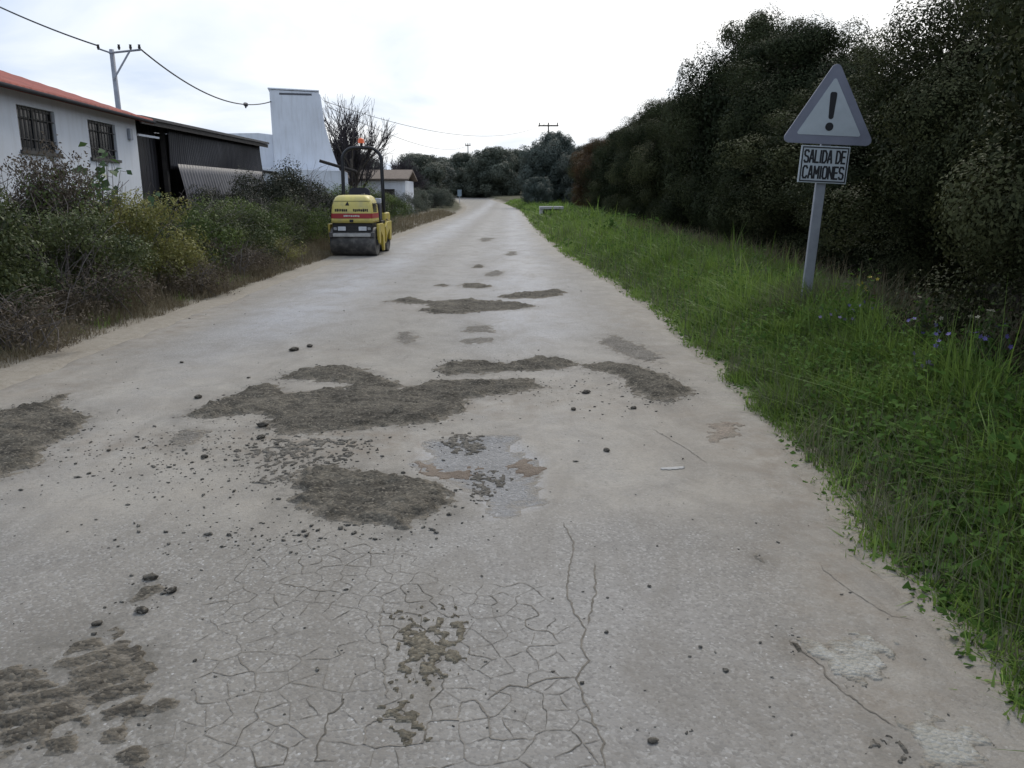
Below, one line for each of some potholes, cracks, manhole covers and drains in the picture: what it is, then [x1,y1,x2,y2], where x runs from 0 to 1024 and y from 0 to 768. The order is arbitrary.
pothole [407,434,551,519]
crack [143,522,611,768]
pothole [388,603,481,693]
pothole [377,694,433,747]
crack [802,651,894,726]
